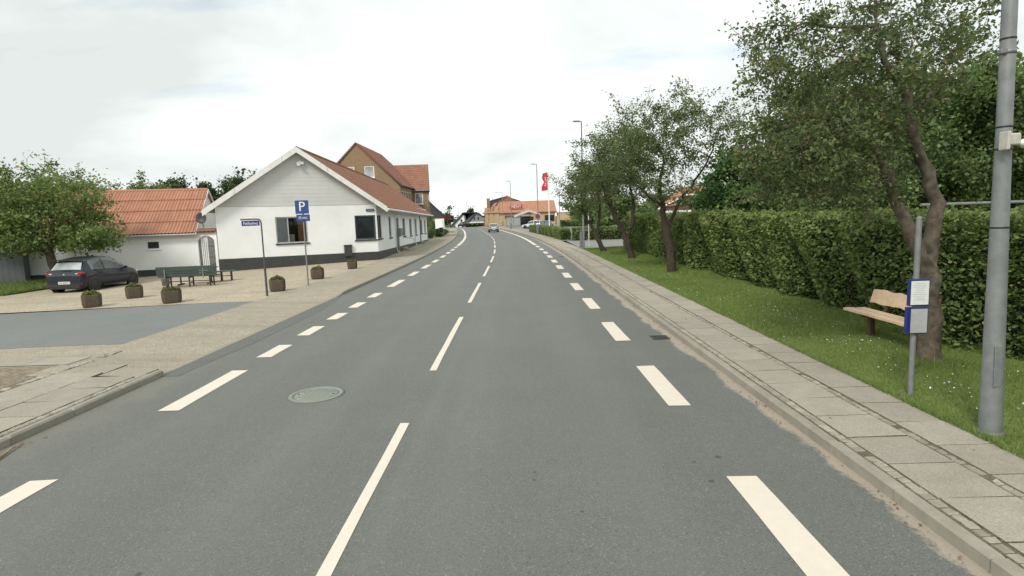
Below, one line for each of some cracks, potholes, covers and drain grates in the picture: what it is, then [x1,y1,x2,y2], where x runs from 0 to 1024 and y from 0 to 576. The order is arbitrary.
manhole cover [286,386,345,404]
